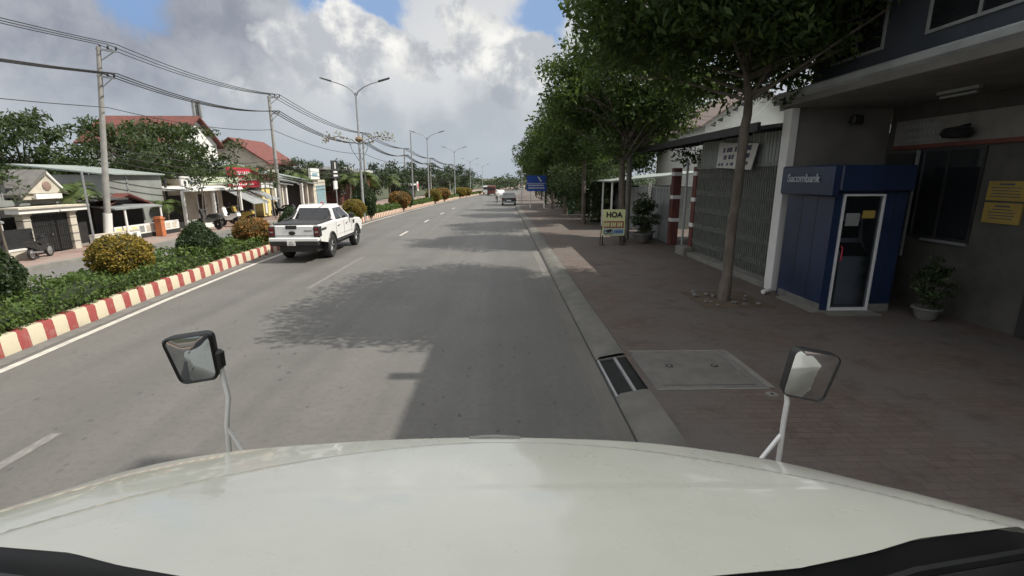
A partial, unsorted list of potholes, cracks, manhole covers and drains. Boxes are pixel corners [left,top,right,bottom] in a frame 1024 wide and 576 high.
manhole cover [627,350,775,391]
drain grate [597,354,658,398]
